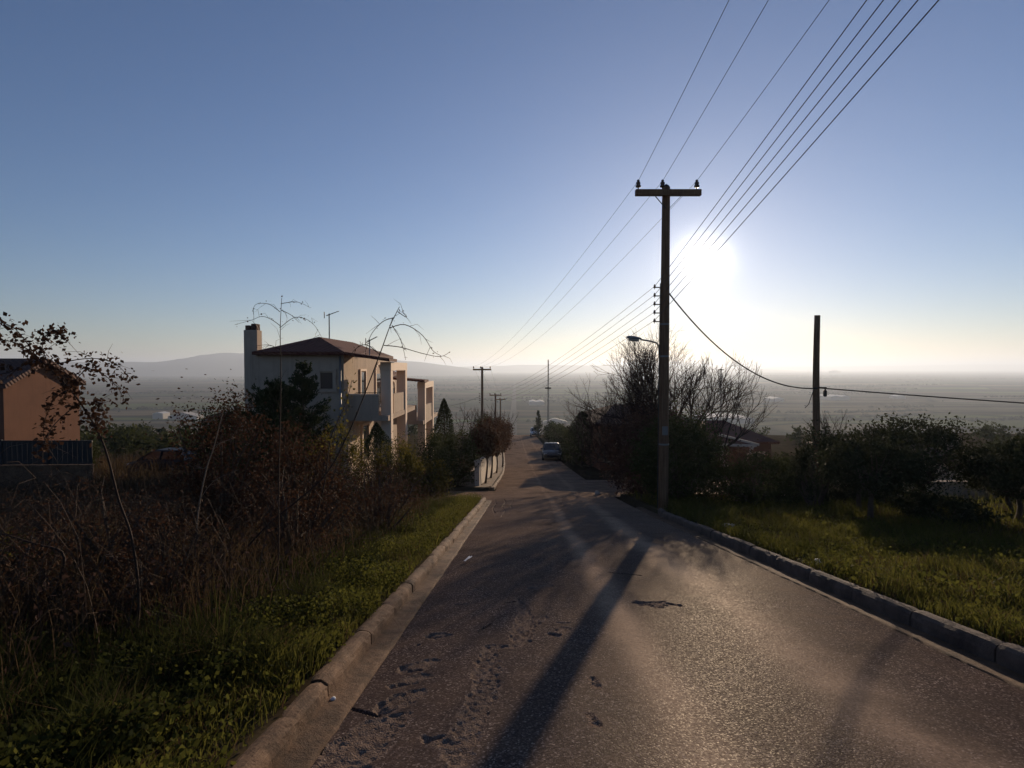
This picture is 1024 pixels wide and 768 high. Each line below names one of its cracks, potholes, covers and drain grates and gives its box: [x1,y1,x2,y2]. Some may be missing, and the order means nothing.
pothole [395,657,442,675]
pothole [584,712,604,727]
pothole [544,626,574,637]
pothole [314,711,414,768]
pothole [423,632,454,640]
pothole [418,734,448,744]
pothole [428,598,538,768]
pothole [629,600,683,609]
pothole [372,687,429,715]
pothole [586,676,603,689]
